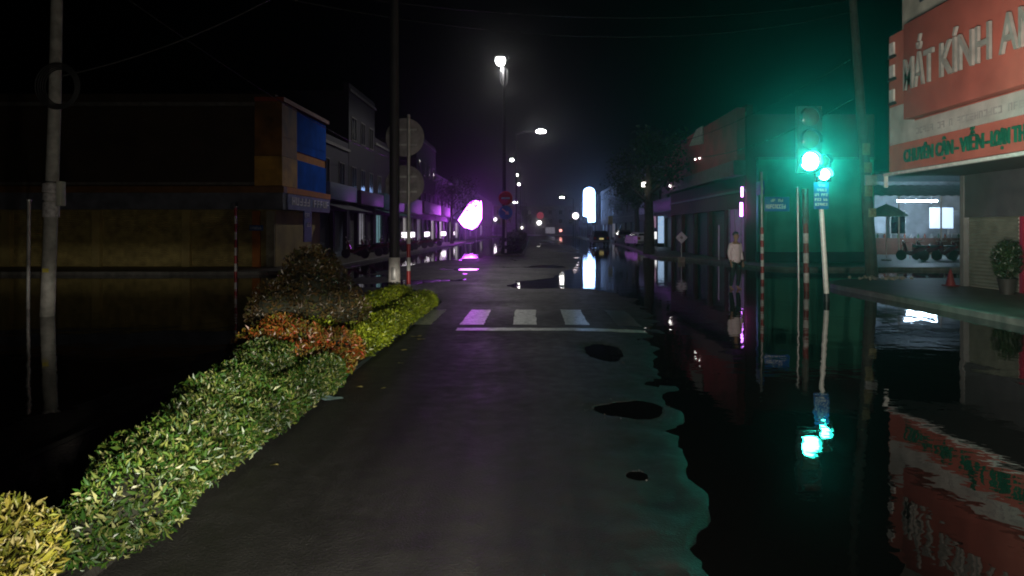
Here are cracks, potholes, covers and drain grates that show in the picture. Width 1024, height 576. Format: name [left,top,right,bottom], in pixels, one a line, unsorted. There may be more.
pothole [582,398,674,423]
pothole [581,340,625,364]
pothole [625,469,650,481]
